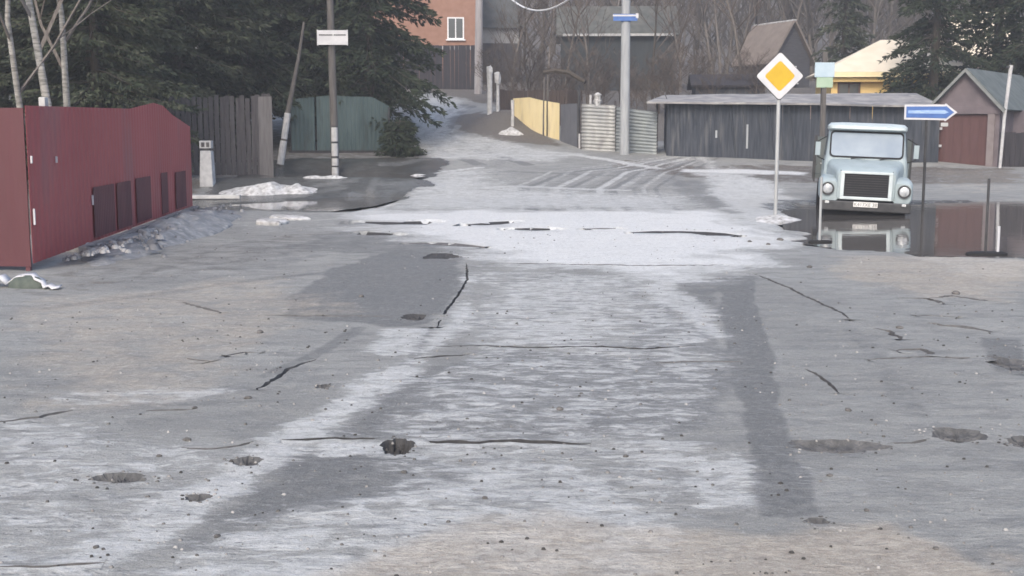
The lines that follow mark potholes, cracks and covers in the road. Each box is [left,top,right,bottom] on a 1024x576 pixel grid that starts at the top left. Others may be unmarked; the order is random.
pothole [917,424,998,447]
crack [414,436,592,449]
pothole [410,252,475,261]
crack [281,434,379,445]
crack [0,409,82,425]
pothole [389,312,450,323]
pothole [995,432,1024,452]
crack [340,220,1009,394]
pothole [70,468,164,489]
pothole [773,436,909,458]
pothole [365,435,430,459]
crack [176,350,326,391]
